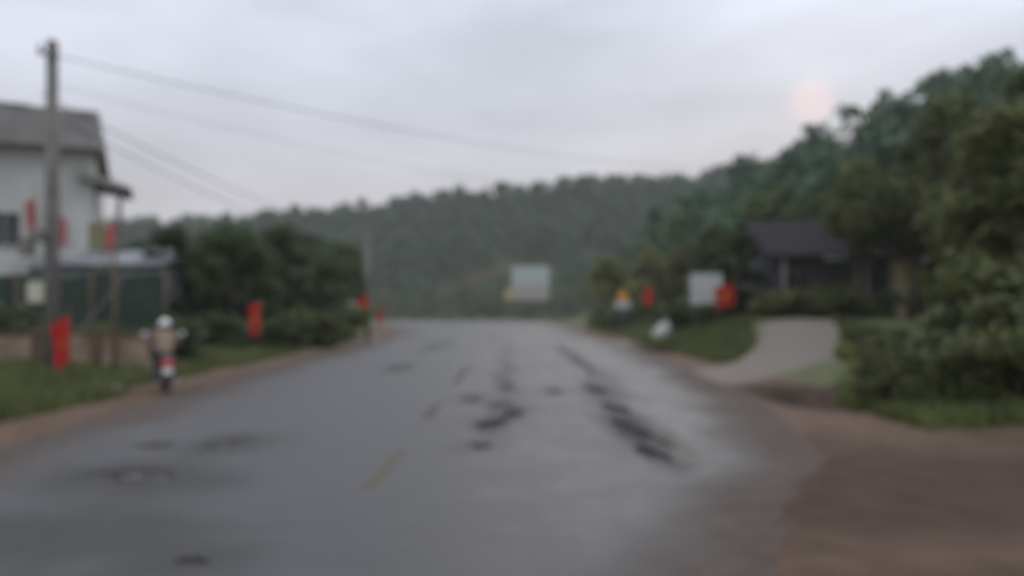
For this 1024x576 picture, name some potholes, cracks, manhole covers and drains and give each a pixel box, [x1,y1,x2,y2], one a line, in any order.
crack [559,346,592,383]
pothole [79,469,177,481]
pothole [611,419,656,441]
pothole [635,445,673,462]
pothole [202,440,253,449]
pothole [599,403,632,413]
pothole [474,419,506,430]
pothole [503,410,525,418]
pothole [173,557,211,565]
